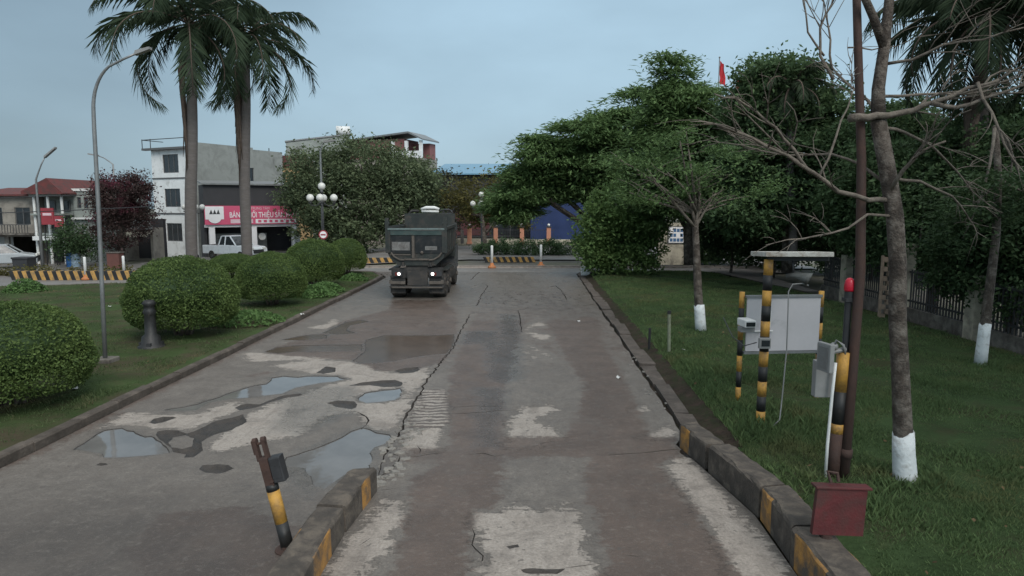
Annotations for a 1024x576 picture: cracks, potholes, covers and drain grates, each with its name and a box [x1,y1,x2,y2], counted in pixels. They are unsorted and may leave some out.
pothole [285,427,391,489]
pothole [358,388,402,403]
pothole [166,376,345,411]
pothole [73,428,170,457]
crack [378,353,448,490]
